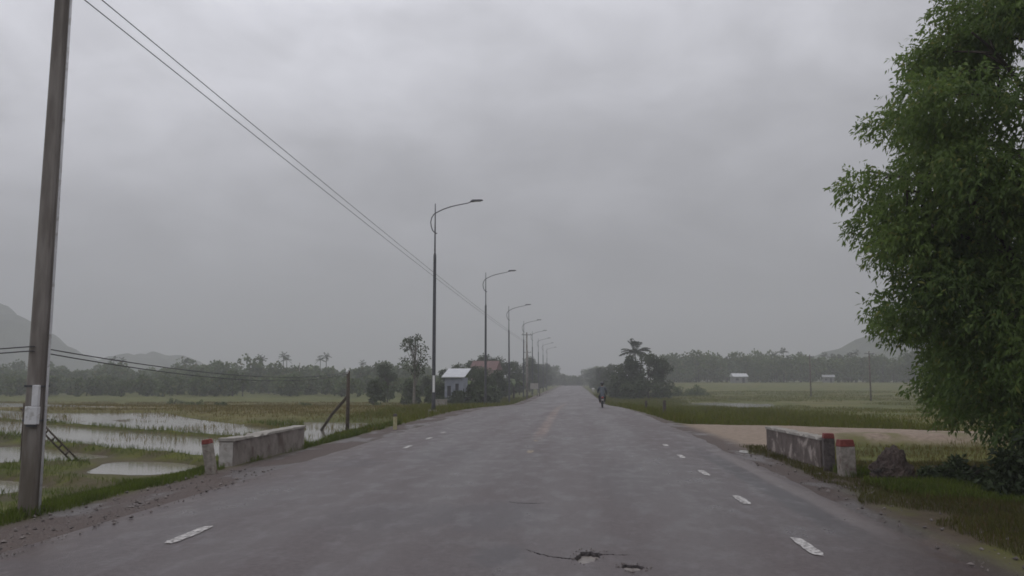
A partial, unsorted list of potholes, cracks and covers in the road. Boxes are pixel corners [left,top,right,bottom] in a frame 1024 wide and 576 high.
pothole [570,548,607,565]
pothole [616,562,653,572]
